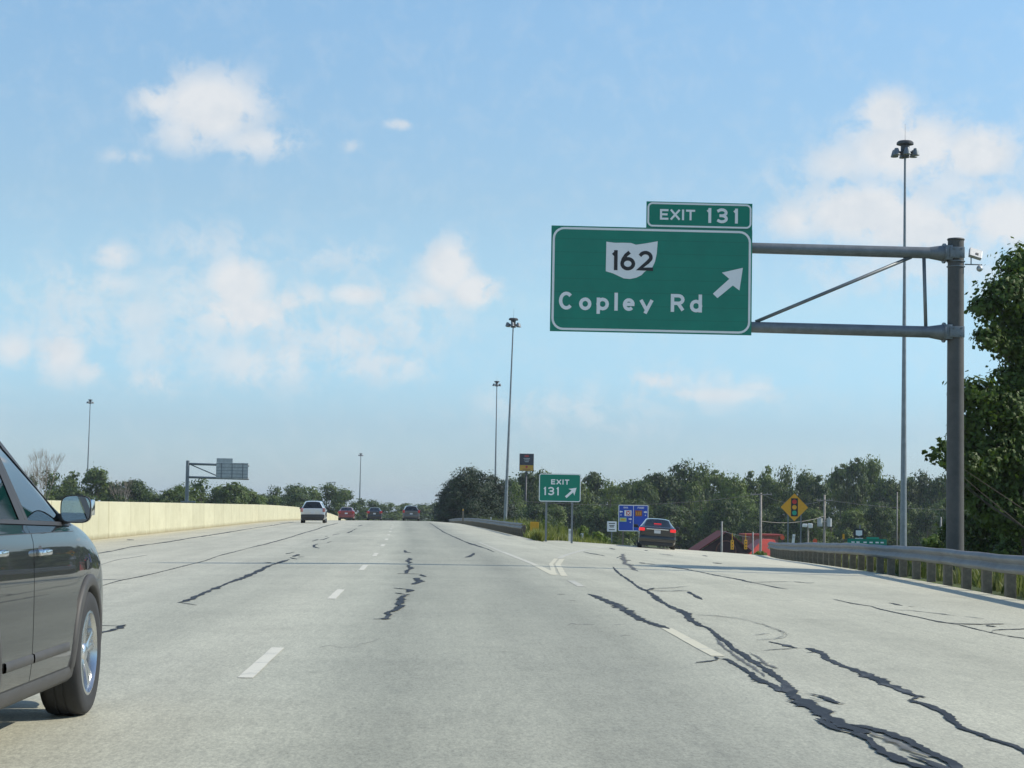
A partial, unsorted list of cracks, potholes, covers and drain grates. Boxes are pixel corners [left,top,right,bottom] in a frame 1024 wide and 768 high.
crack [179,525,362,605]
crack [835,599,1024,638]
crack [586,548,804,599]
